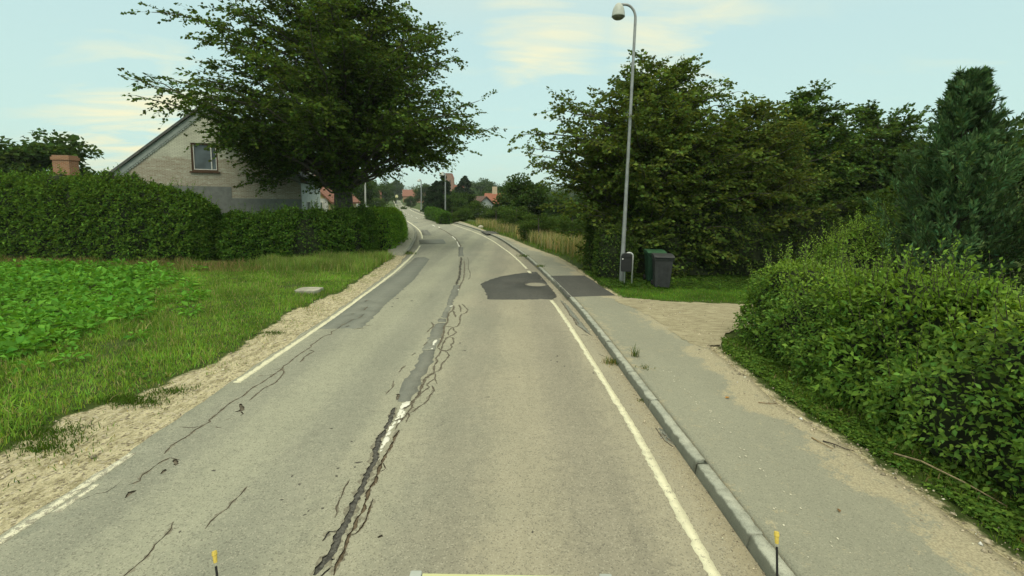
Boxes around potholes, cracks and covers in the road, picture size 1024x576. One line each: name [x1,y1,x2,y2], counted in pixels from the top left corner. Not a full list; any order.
crack [333,257,471,575]
crack [124,522,179,576]
crack [81,301,367,500]
